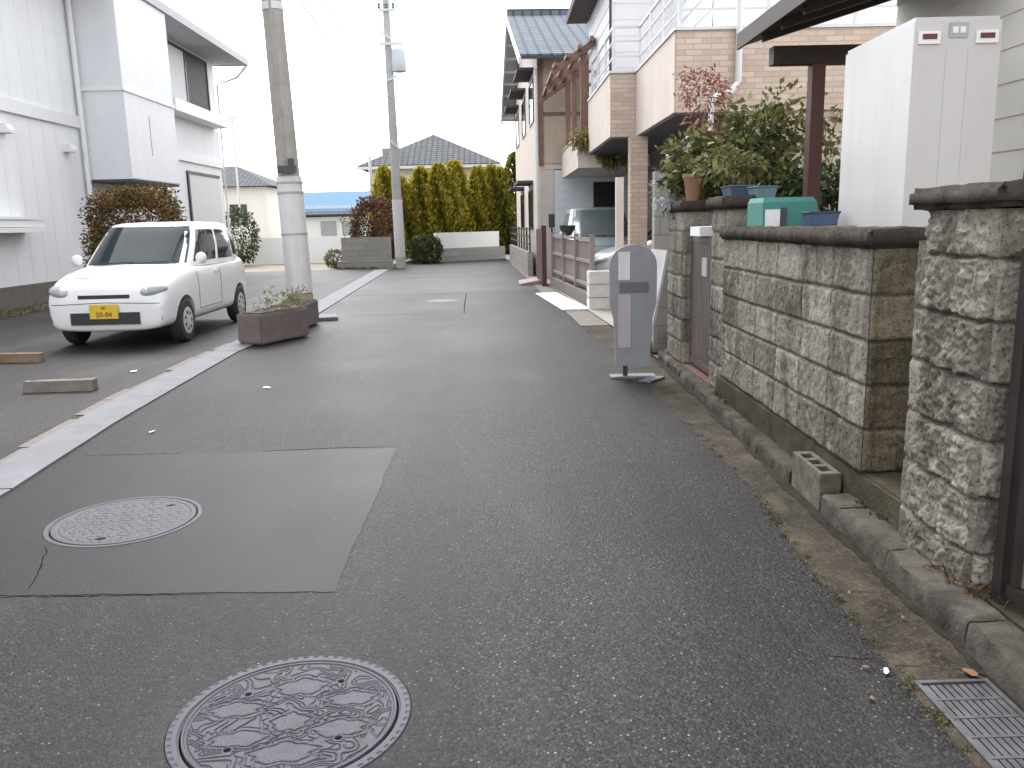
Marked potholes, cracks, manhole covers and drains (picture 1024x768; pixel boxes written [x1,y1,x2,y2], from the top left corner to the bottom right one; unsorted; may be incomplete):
manhole cover [42,496,203,548]
manhole cover [164,656,412,768]
drain grate [913,678,1024,768]
crack [0,548,192,598]
